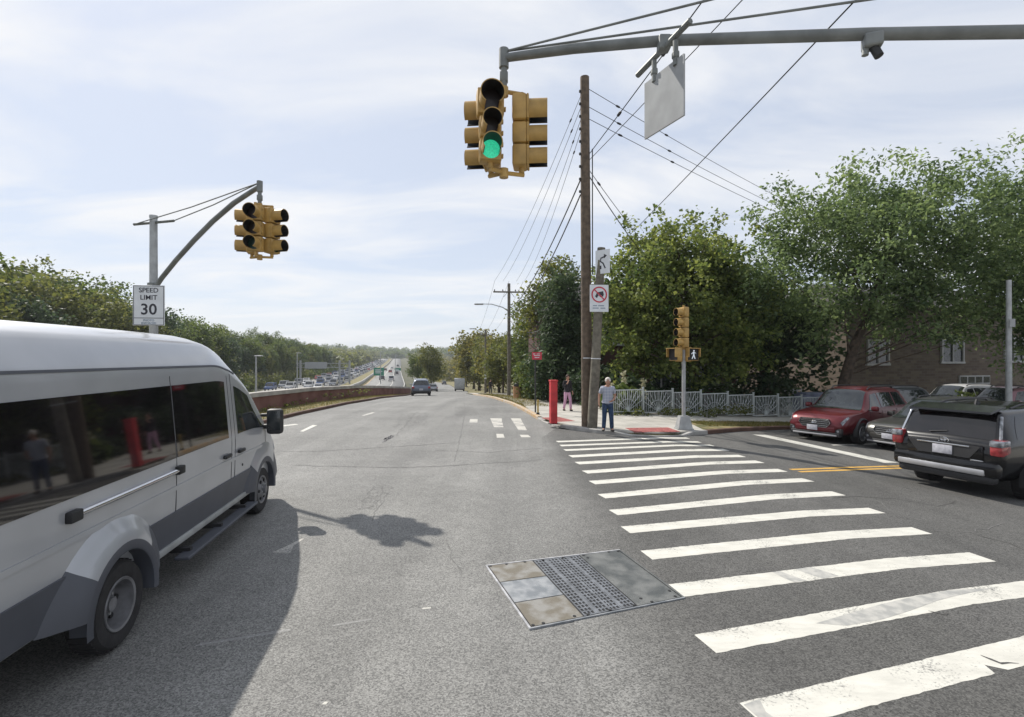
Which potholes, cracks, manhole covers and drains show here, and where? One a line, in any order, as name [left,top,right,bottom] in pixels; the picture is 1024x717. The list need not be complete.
crack [358,485,394,524]
